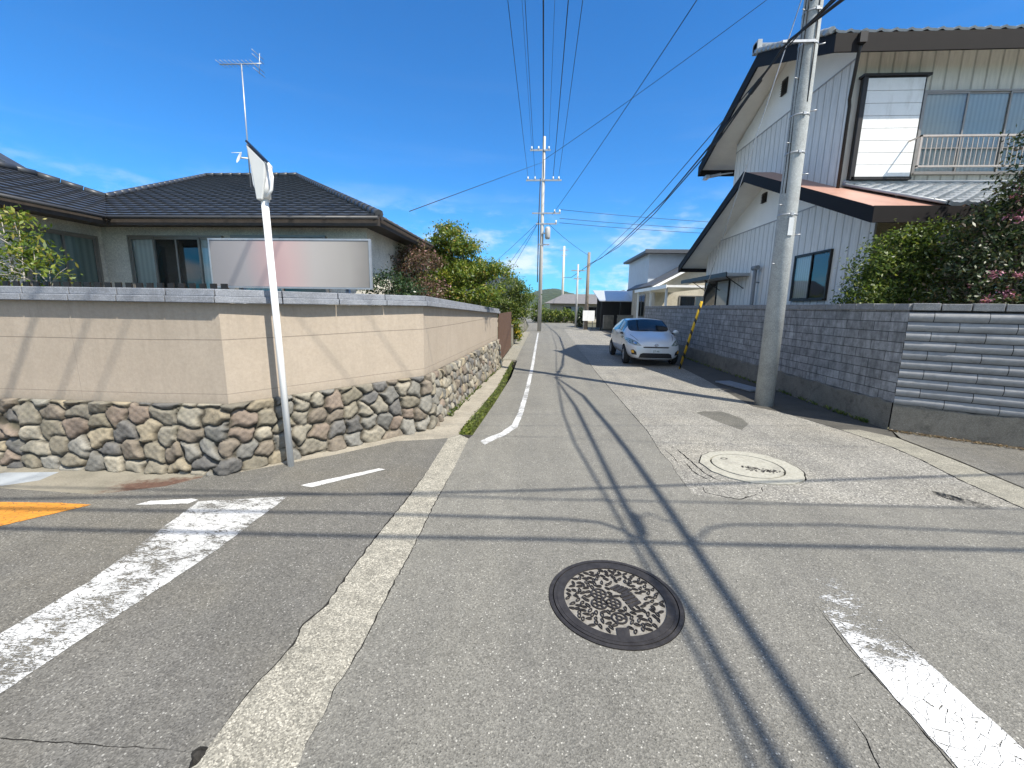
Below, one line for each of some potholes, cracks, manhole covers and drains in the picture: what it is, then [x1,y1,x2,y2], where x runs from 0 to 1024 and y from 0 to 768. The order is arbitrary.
pothole [189,746,209,768]
manhole cover [698,451,807,485]
manhole cover [548,560,685,651]
crack [220,469,449,748]
crack [0,738,184,752]
